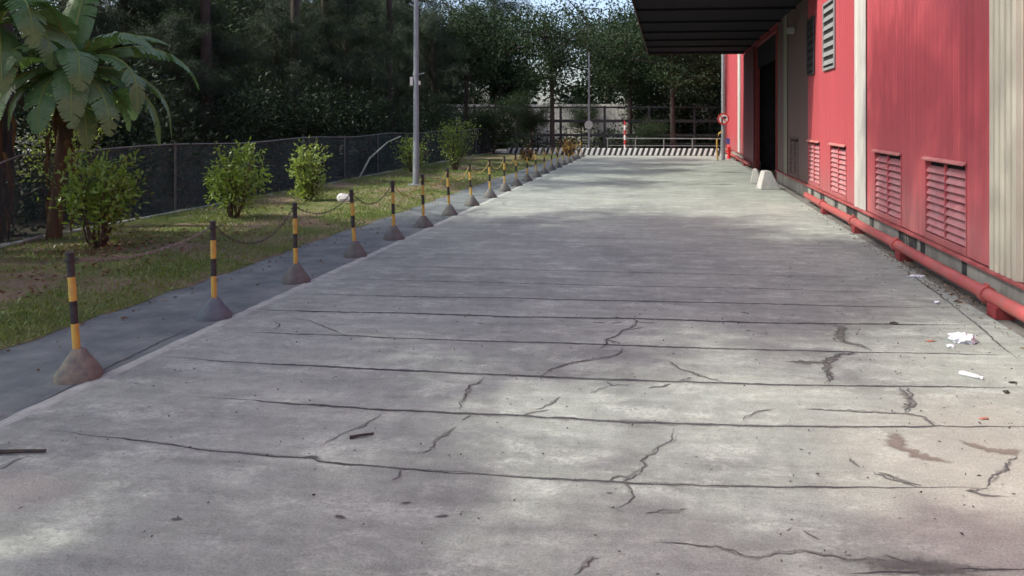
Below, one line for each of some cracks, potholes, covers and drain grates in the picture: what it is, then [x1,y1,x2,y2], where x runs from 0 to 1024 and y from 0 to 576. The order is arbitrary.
crack [849,458,922,487]
crack [608,426,687,513]
crack [786,325,872,384]
crack [817,387,935,426]
crack [666,528,887,561]
crack [649,361,723,388]
crack [968,455,1017,497]
crack [540,319,646,379]
crack [419,378,484,453]
